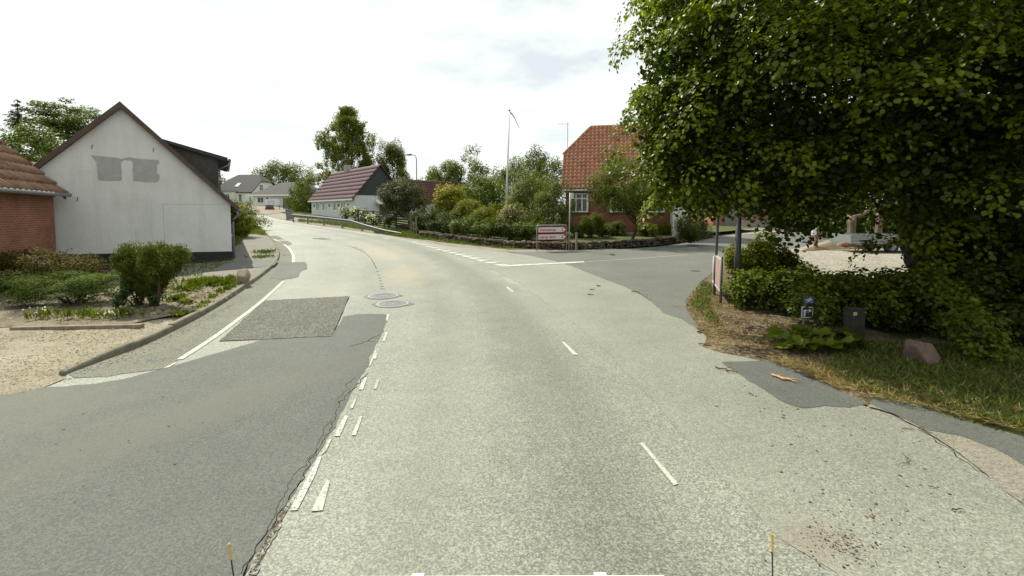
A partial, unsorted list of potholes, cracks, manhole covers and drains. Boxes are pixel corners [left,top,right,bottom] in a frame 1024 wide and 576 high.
manhole cover [372,300,414,308]
crack [920,430,1023,505]
crack [241,373,368,576]
